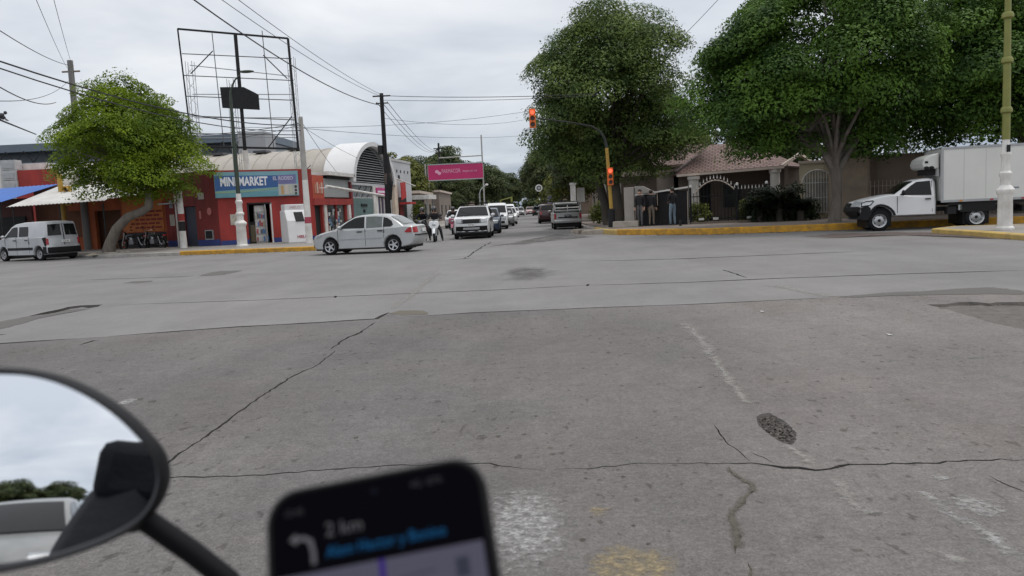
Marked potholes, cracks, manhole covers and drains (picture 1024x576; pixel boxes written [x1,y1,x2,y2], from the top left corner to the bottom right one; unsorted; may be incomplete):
pothole [756,413,797,445]
crack [169,323,537,478]
crack [557,425,1022,576]
